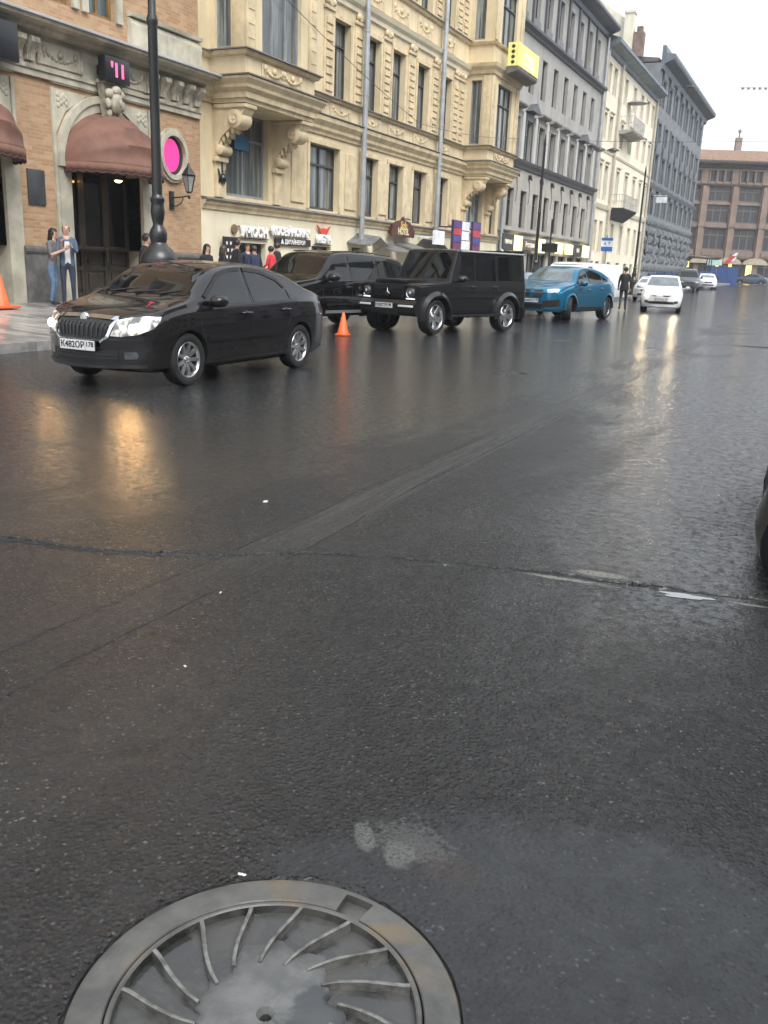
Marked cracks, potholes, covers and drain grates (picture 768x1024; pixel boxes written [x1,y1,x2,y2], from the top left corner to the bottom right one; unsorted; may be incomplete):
manhole cover [55,870,464,1024]
